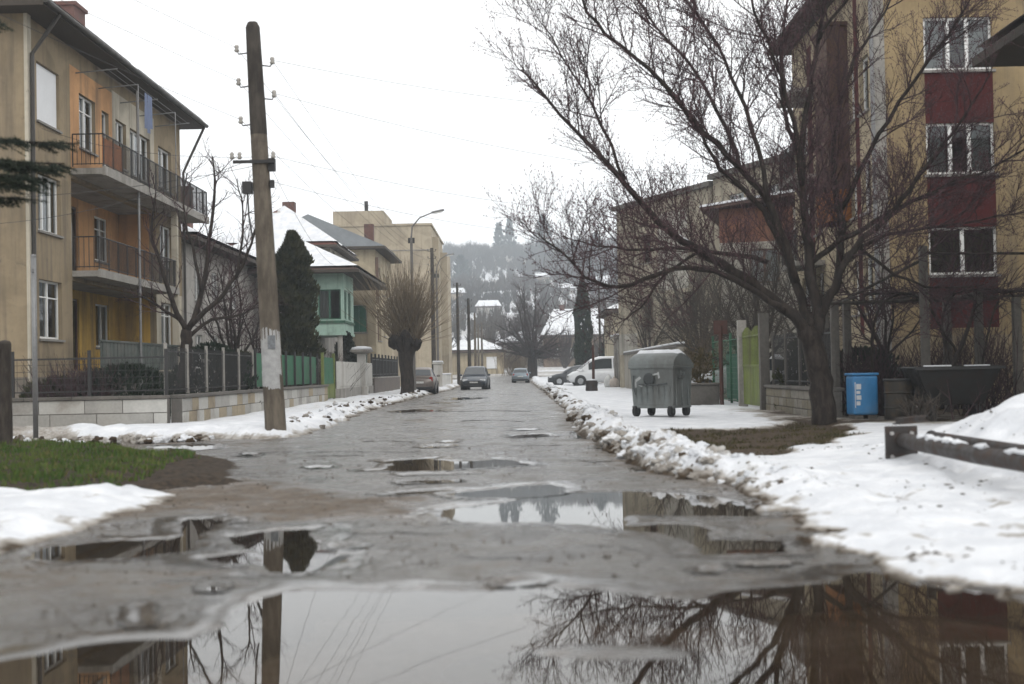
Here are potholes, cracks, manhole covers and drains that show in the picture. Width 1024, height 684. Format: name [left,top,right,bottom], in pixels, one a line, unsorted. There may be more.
pothole [417,489,816,557]
pothole [174,525,374,575]
pothole [116,599,164,628]
pothole [190,580,235,593]
pothole [354,457,545,472]
pothole [426,481,586,499]
pothole [4,515,242,564]
pothole [484,573,559,588]
